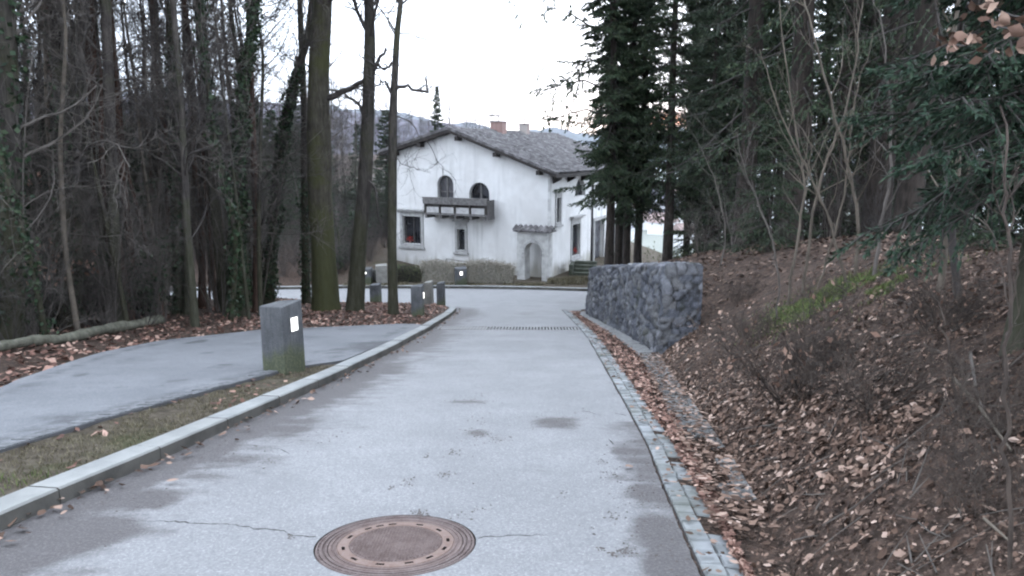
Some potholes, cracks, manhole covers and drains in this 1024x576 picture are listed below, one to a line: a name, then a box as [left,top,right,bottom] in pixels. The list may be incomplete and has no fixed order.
crack [165,520,316,537]
manhole cover [313,515,476,576]
